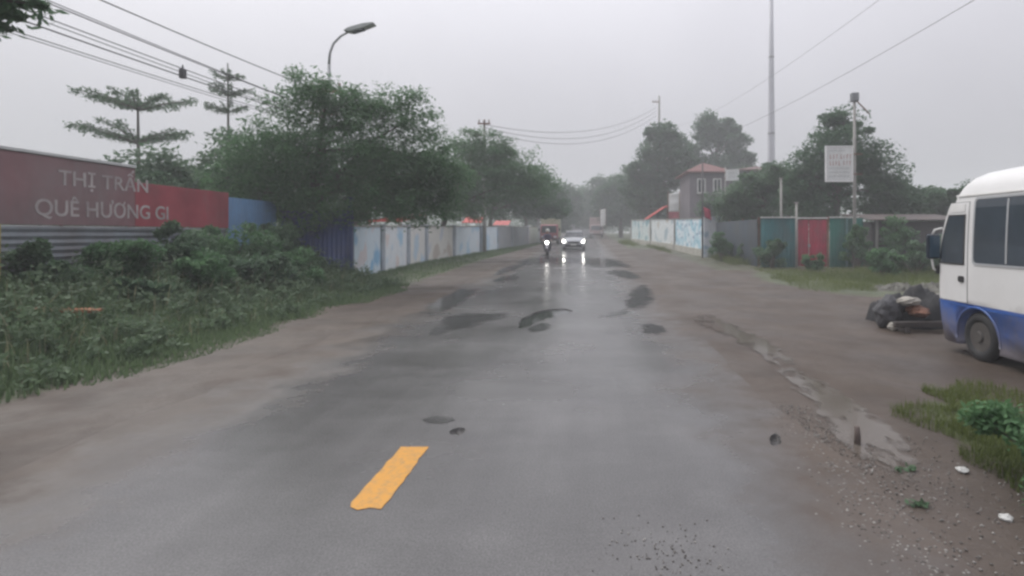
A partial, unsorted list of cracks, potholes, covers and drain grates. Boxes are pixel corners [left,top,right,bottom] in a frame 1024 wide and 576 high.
pothole [518,309,573,328]
pothole [769,433,782,446]
